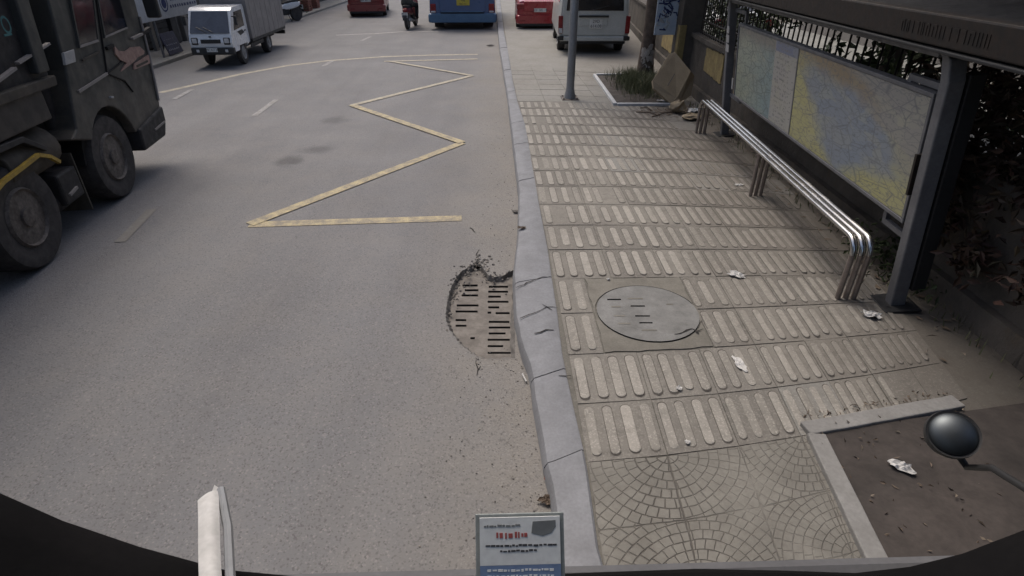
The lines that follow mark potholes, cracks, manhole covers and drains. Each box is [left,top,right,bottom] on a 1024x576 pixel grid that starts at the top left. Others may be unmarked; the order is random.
manhole cover [585,277,713,353]
